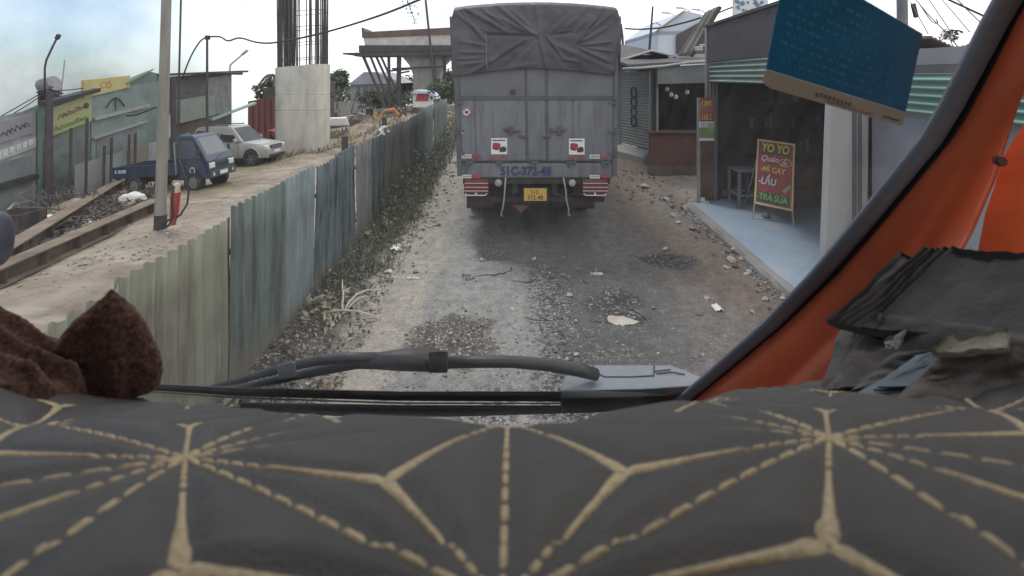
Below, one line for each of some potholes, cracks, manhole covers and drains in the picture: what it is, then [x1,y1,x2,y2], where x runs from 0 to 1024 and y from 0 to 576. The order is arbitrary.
pothole [585,289,641,312]
pothole [642,253,698,270]
pothole [400,312,502,374]
